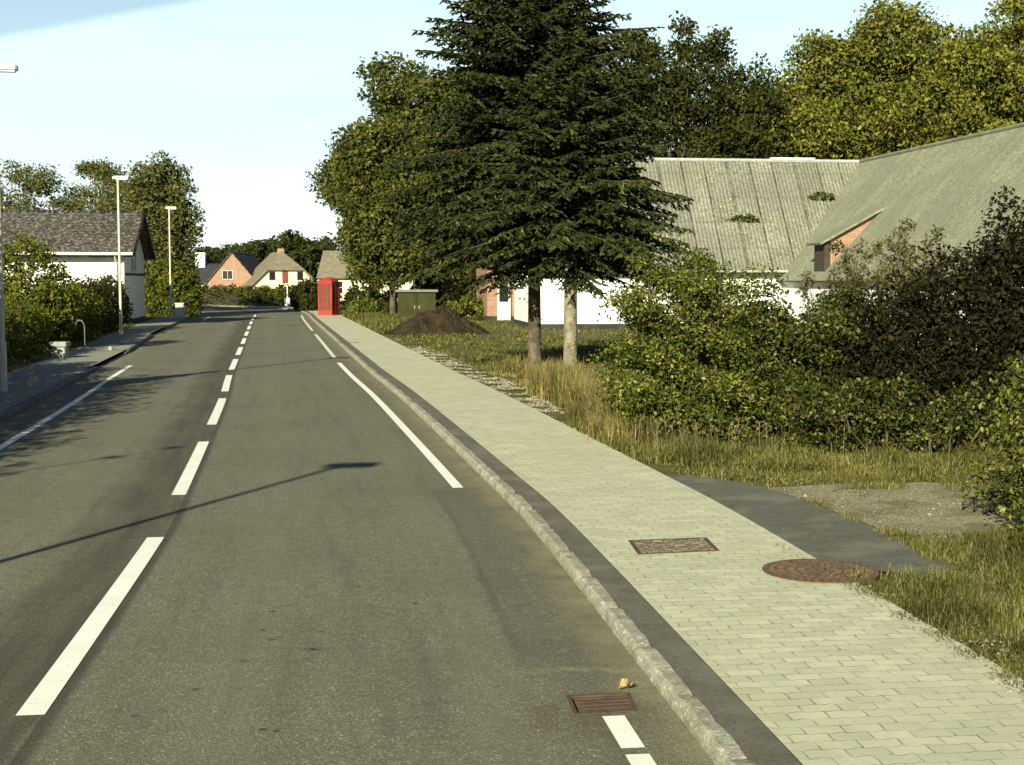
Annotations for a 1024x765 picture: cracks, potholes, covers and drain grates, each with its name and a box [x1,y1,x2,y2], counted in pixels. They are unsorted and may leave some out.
manhole cover [628,537,719,555]
manhole cover [762,559,879,584]
drain grate [566,692,638,715]
